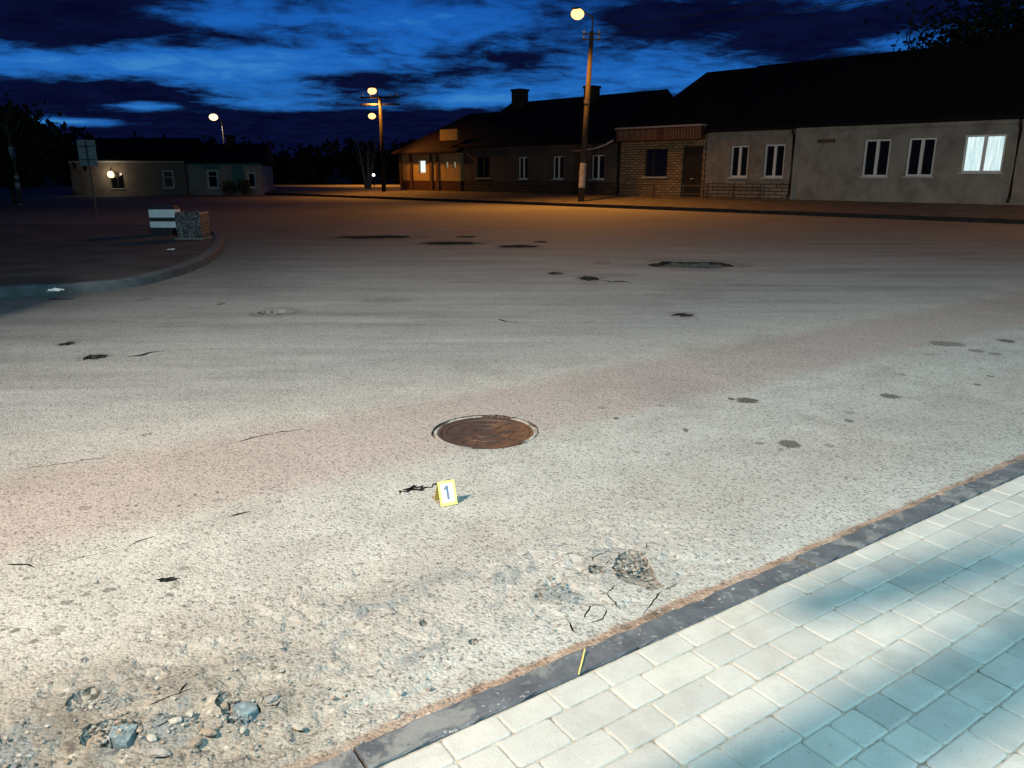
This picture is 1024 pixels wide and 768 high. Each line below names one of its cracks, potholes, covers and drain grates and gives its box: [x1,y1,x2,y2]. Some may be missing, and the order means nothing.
pothole [612,549,663,591]
manhole cover [431,415,539,449]
pothole [64,686,103,713]
pothole [78,718,143,749]
pothole [215,691,261,726]
crack [565,543,675,632]
